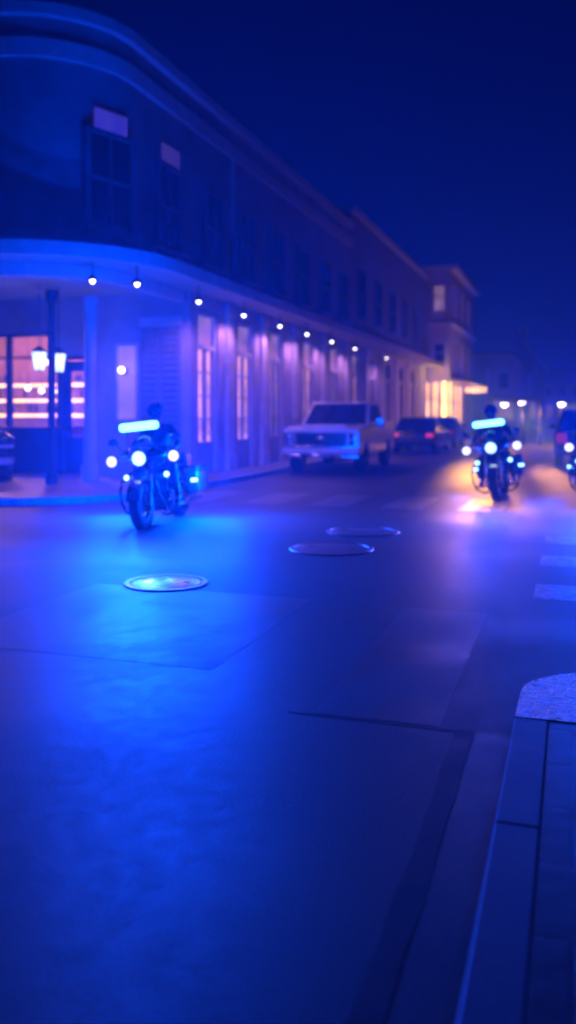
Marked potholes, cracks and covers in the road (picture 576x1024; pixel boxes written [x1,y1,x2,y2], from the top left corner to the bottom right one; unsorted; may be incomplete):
manhole cover [326,526,400,537]
manhole cover [289,542,374,556]
manhole cover [123,574,209,592]
